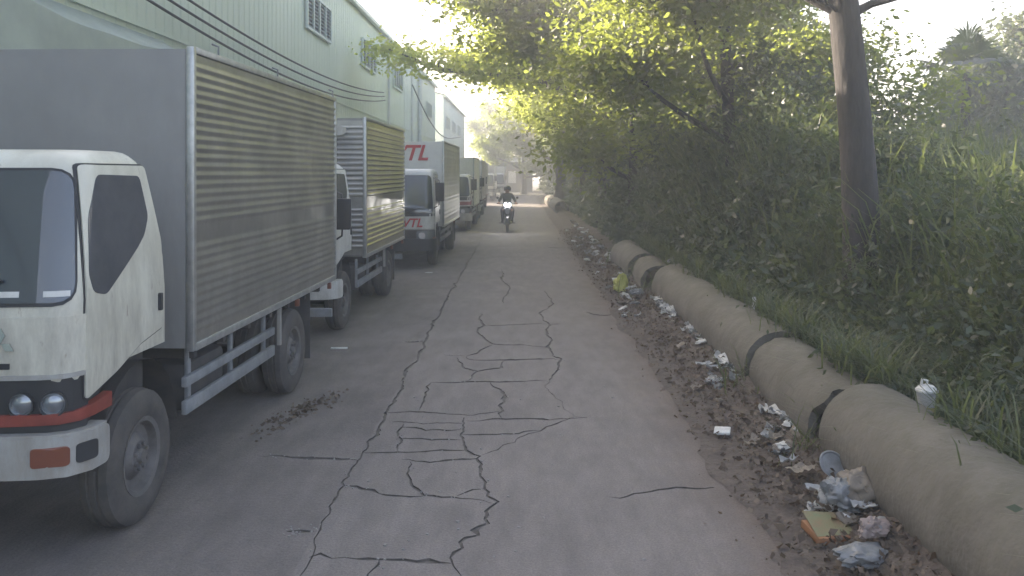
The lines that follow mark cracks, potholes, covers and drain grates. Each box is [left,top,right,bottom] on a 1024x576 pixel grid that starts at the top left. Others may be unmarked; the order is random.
crack [309,269,587,576]
crack [612,486,714,499]
